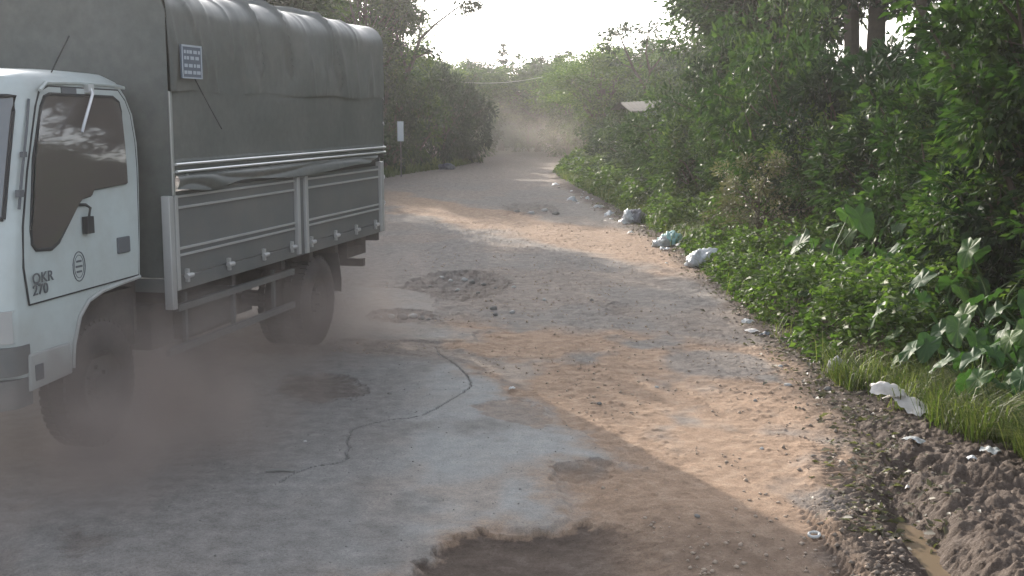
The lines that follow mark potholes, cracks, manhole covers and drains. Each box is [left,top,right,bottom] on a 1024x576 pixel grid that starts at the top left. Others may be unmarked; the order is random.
pothole [502,202,563,216]
pothole [364,308,441,323]
crack [279,347,472,483]
pothole [274,372,371,404]
pothole [410,521,679,576]
pothole [548,457,617,487]
pothole [392,269,515,302]
